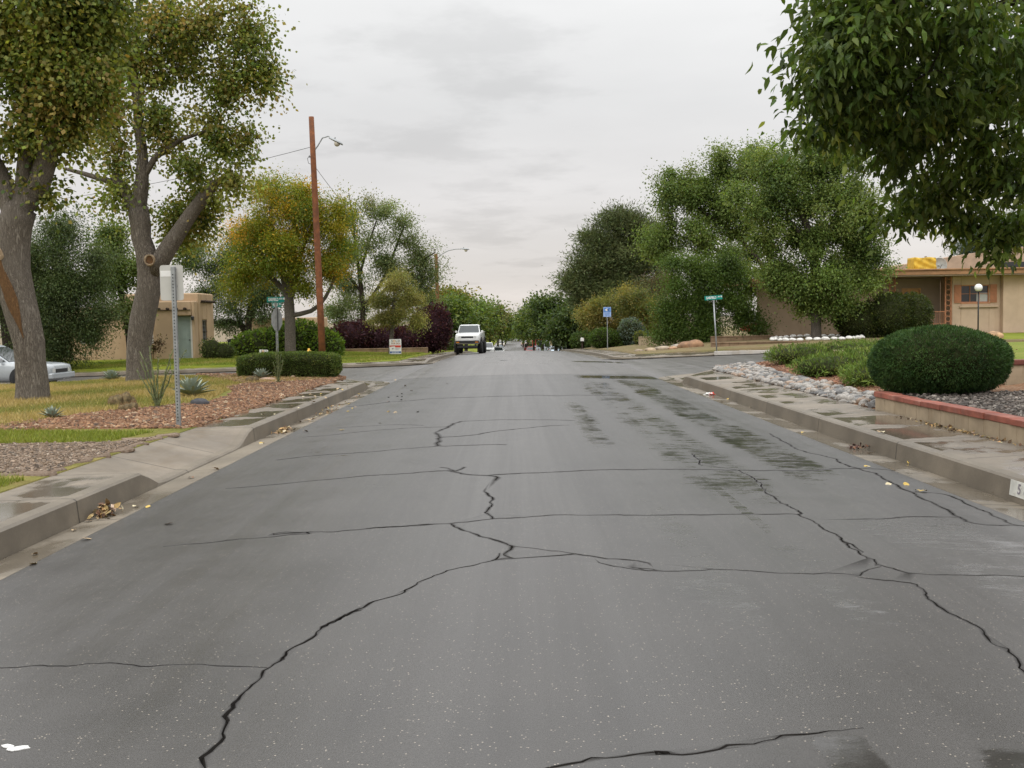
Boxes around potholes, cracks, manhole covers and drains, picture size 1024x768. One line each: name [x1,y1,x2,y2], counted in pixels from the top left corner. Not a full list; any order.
crack [8,454,1024,768]
crack [772,435,1020,526]
